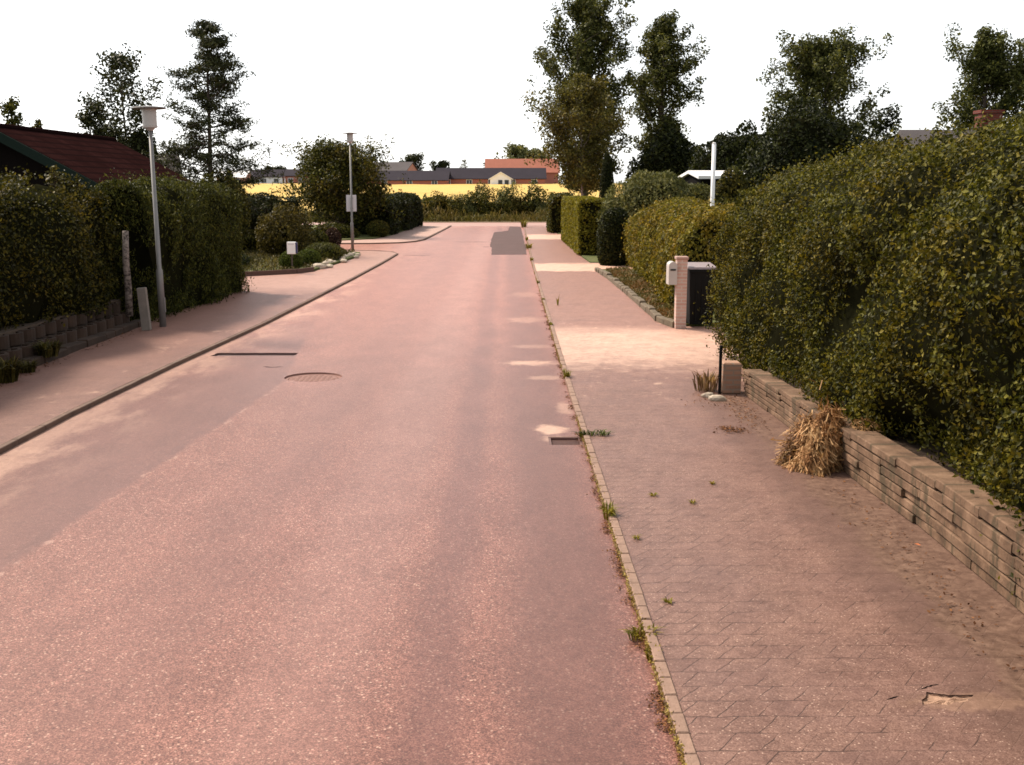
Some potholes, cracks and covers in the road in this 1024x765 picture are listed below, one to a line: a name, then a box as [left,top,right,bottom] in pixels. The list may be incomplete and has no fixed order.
pothole [922,692,973,705]
drain grate [548,437,583,445]
manhole cover [284,372,342,382]
